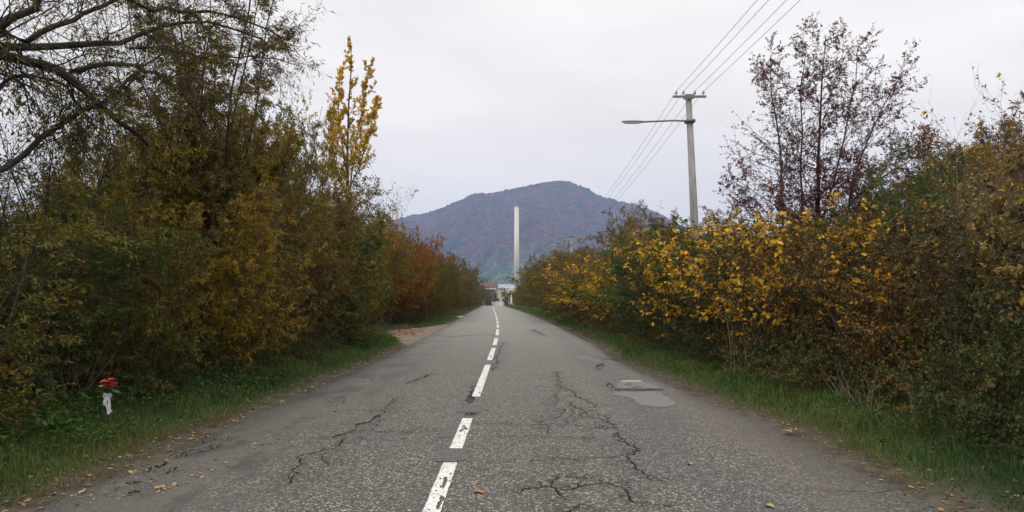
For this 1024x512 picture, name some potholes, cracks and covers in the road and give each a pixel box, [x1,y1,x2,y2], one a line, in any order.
crack [287,375,437,483]
crack [490,372,671,512]
